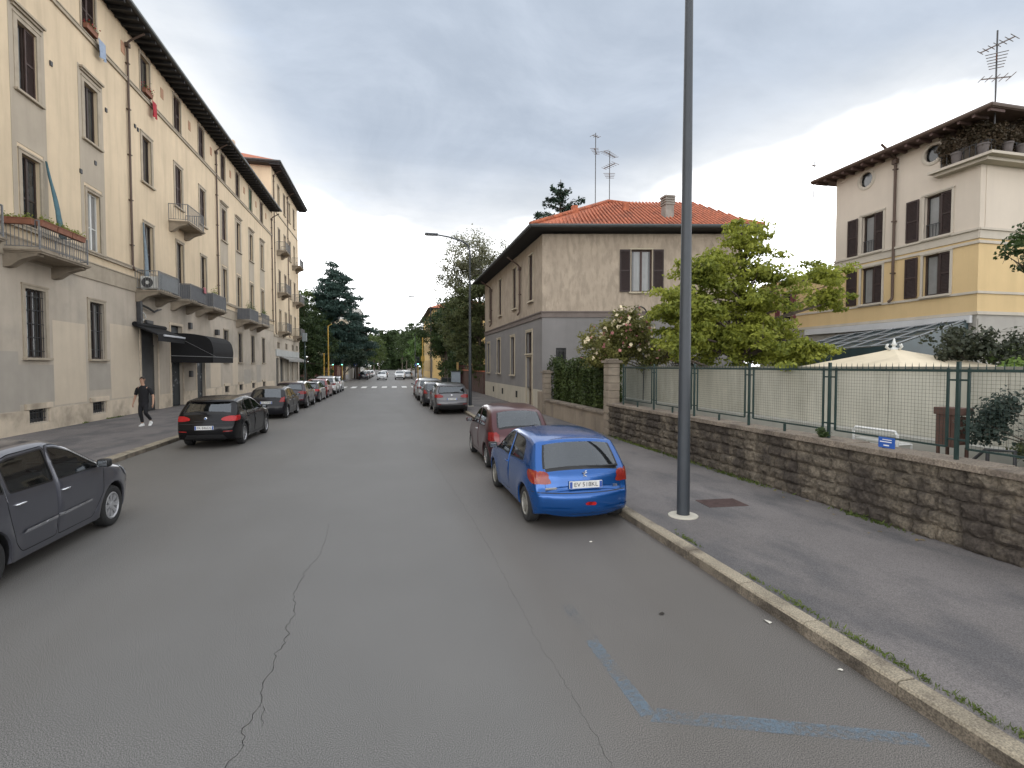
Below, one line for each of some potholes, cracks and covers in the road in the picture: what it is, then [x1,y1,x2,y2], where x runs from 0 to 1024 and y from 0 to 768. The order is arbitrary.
crack [225,528,329,768]
manhole cover [696,498,749,508]
